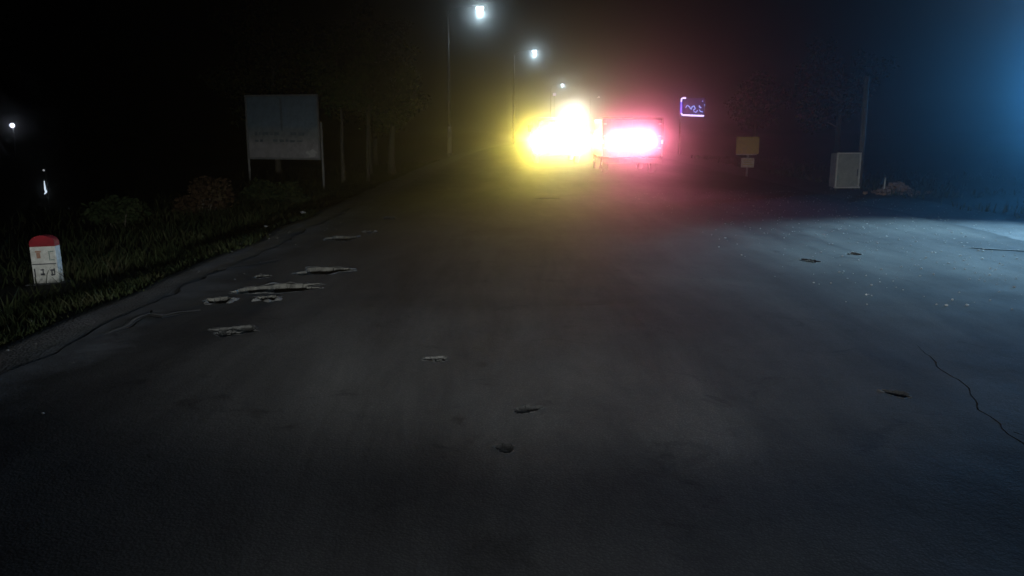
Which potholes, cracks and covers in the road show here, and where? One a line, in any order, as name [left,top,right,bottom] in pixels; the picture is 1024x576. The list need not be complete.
pothole [511,404,546,415]
pothole [206,324,260,337]
pothole [202,296,240,305]
pothole [292,266,358,276]
pothole [228,281,324,294]
crack [917,345,1024,445]
pothole [877,389,913,399]
pothole [420,355,449,363]
pothole [491,442,516,454]
crack [101,310,201,334]
